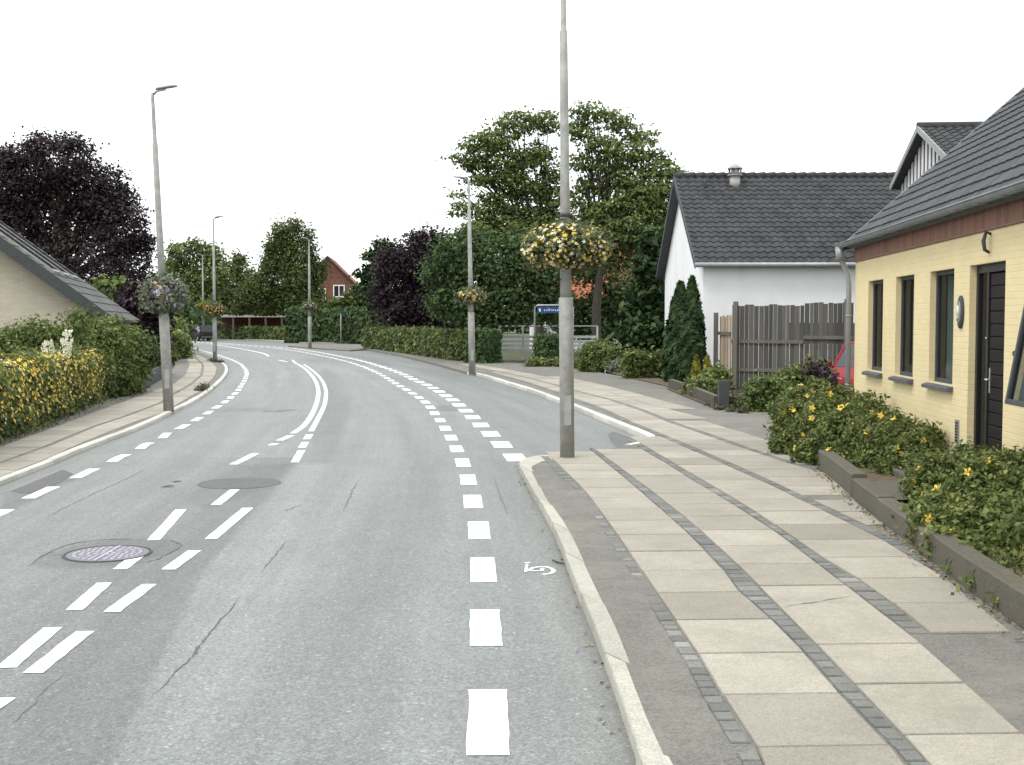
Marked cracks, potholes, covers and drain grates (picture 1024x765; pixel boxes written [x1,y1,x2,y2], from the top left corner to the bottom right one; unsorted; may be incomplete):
manhole cover [62,545,153,562]
crack [152,598,239,695]
